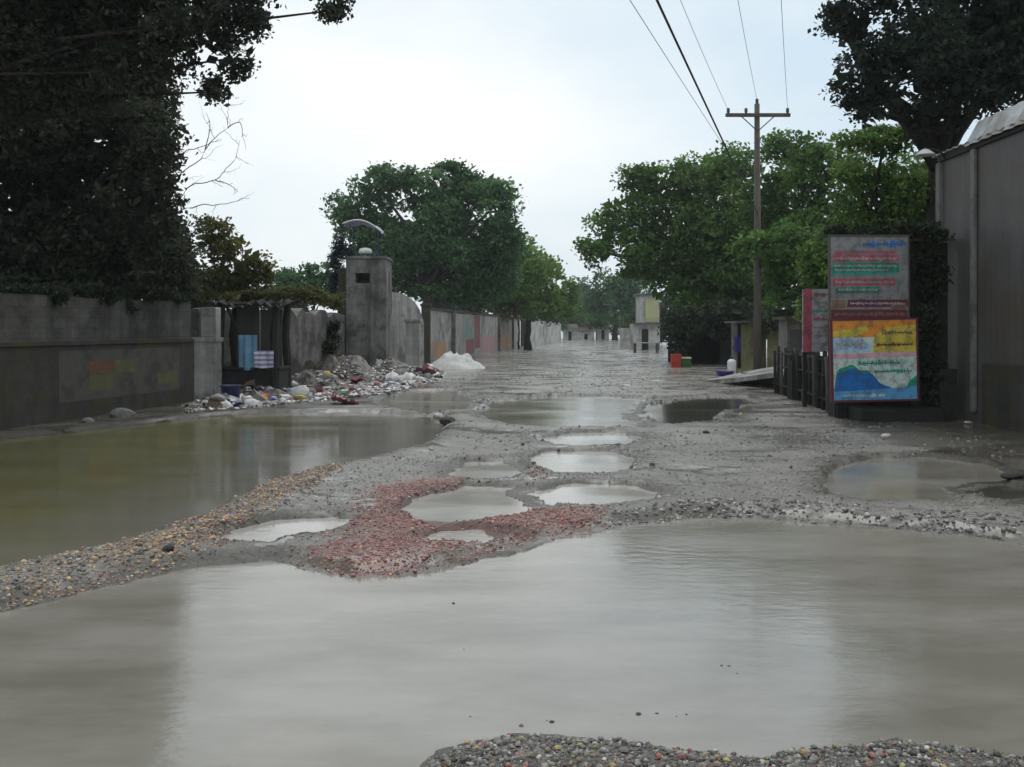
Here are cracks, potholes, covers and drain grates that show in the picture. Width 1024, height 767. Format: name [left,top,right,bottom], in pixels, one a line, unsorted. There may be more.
pothole [436,455,539,480]
pothole [518,478,677,508]
pothole [808,452,1024,502]
pothole [396,519,536,551]
pothole [385,479,569,524]
pothole [186,508,373,547]
pothole [511,446,646,474]
pothole [629,394,764,424]
pothole [522,428,656,446]
pothole [465,393,656,427]
